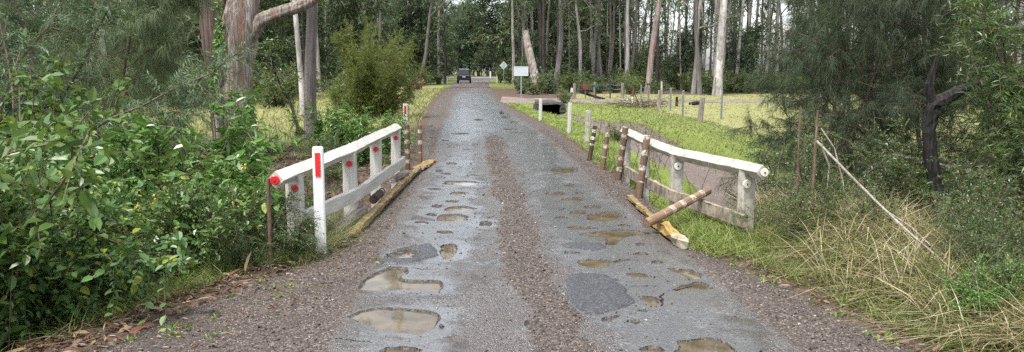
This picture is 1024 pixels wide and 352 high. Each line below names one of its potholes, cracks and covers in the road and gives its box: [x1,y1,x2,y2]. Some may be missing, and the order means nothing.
pothole [347,307,441,334]
pothole [586,211,623,221]
pothole [667,267,702,279]
pothole [638,296,660,307]
pothole [667,281,713,291]
pothole [579,229,652,245]
pothole [439,244,458,260]
pothole [674,337,737,352]
pothole [358,266,444,291]
pothole [577,258,637,268]
